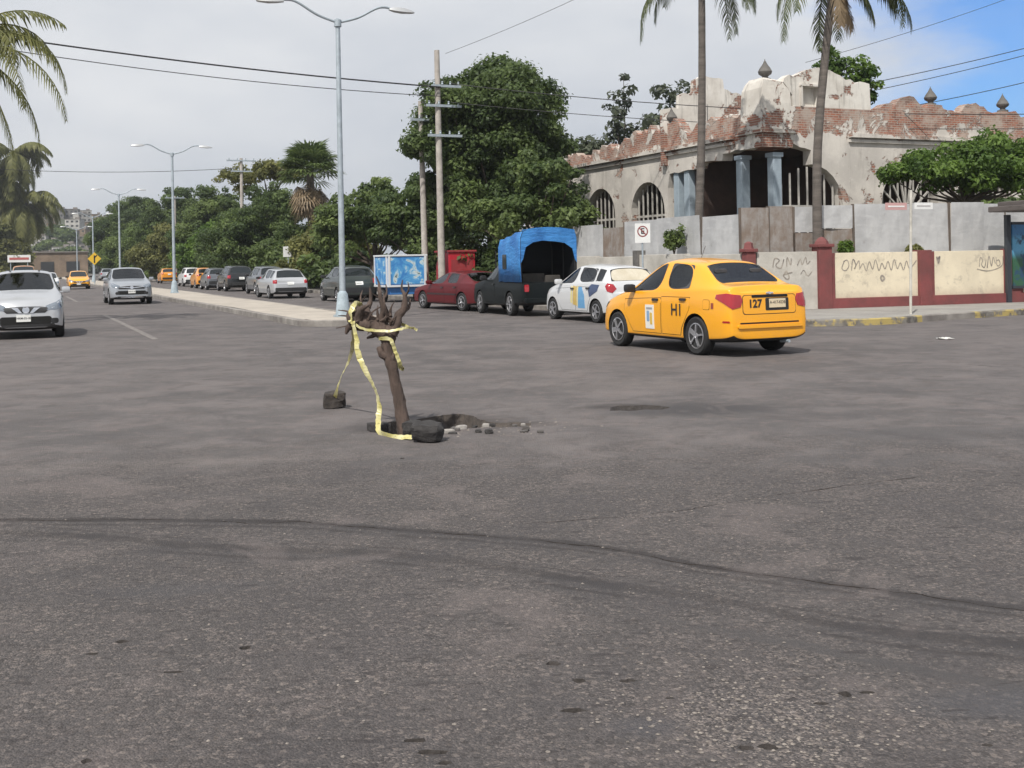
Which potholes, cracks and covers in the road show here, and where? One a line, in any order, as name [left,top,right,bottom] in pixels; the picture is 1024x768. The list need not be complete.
crack [527,477,915,524]
crack [6,519,1024,611]
pothole [388,414,531,434]
